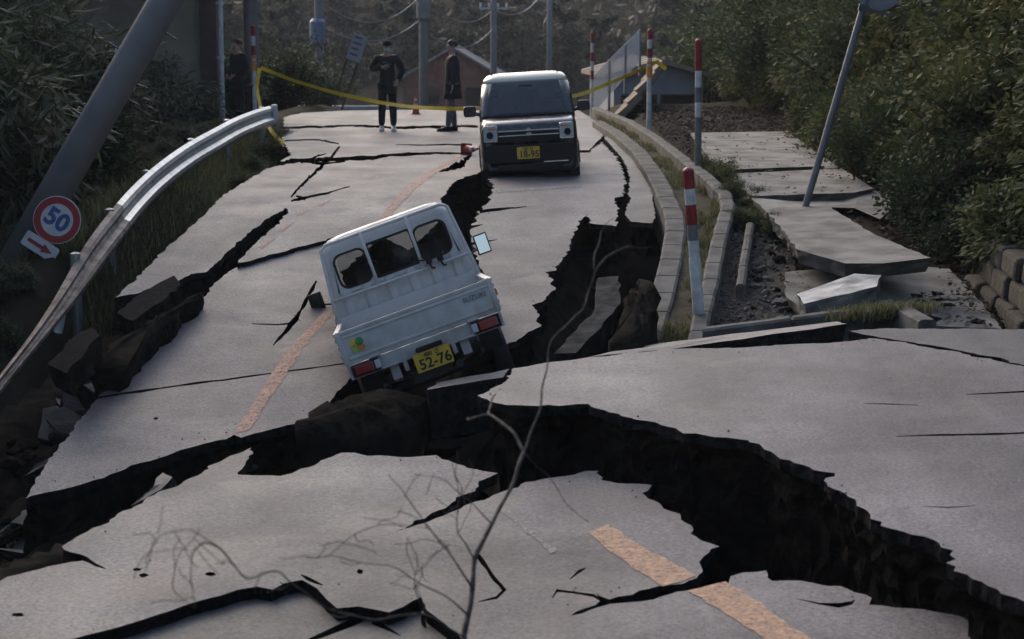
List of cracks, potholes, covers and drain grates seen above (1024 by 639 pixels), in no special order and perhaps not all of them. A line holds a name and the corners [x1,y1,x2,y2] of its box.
crack [280,125,478,202]
crack [0,205,720,639]
crack [796,598,855,608]
